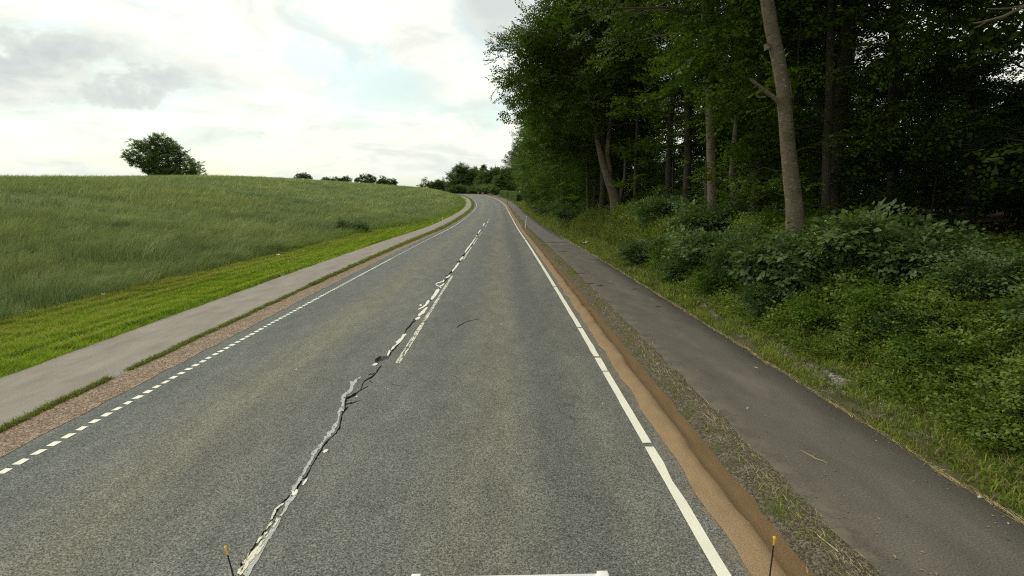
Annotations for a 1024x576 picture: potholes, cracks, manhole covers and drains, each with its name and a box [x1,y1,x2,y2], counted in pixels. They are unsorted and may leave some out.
crack [239,319,416,576]
